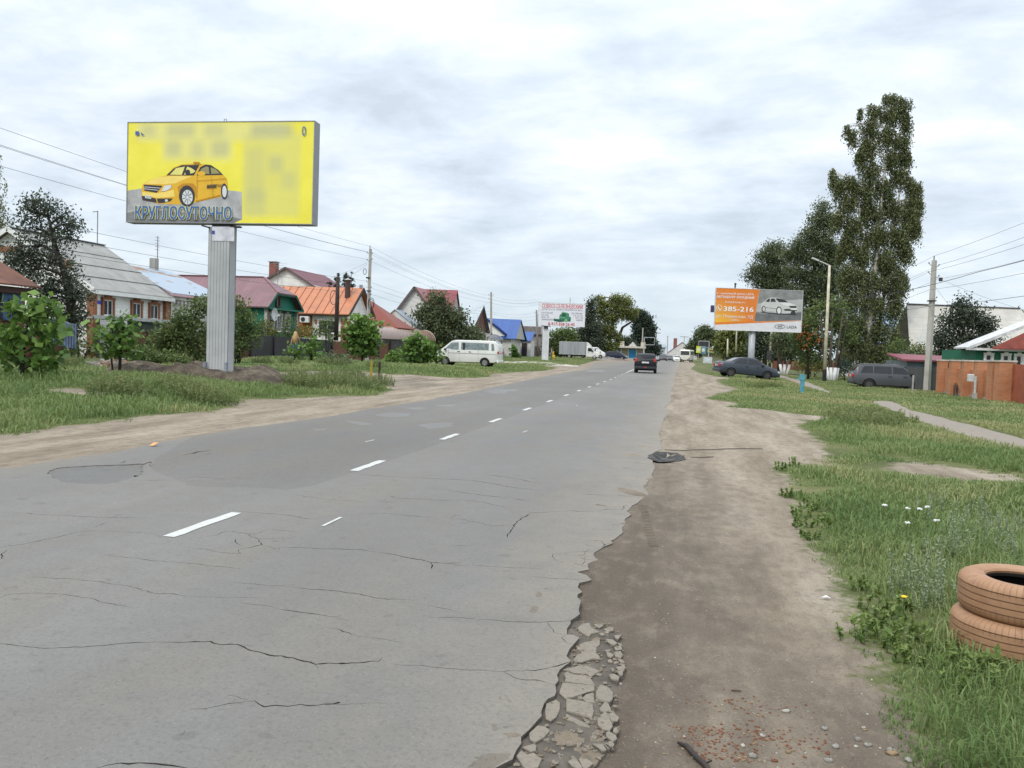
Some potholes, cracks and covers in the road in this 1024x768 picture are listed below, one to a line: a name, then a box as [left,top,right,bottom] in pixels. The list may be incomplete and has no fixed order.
crack [7,641,381,668]
crack [8,578,564,640]
crack [211,699,386,708]
crack [126,513,448,568]
crack [396,476,624,537]
pothole [507,621,626,768]
